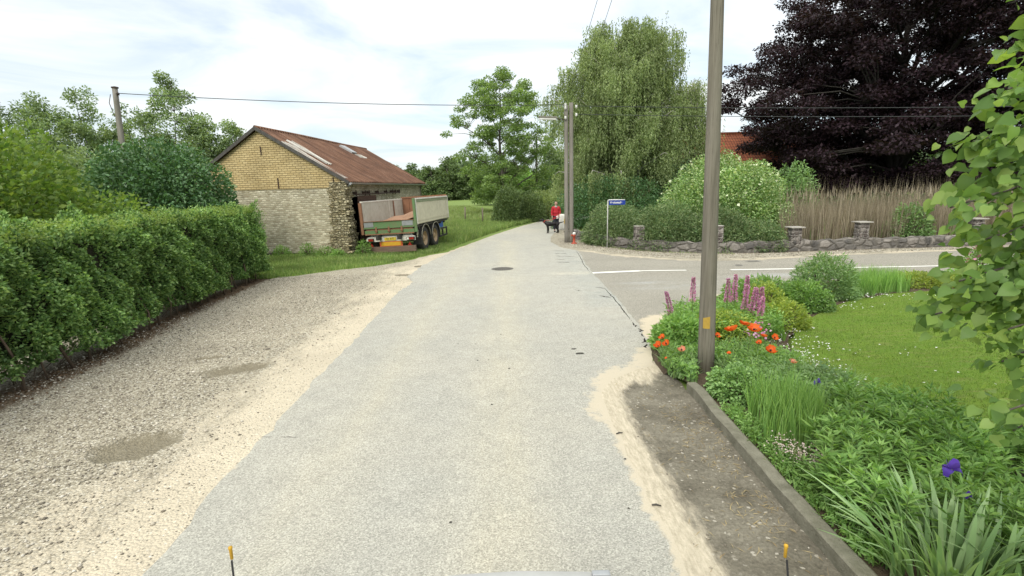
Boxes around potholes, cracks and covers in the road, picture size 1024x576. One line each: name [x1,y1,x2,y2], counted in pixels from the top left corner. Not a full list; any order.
pothole [81,429,188,466]
